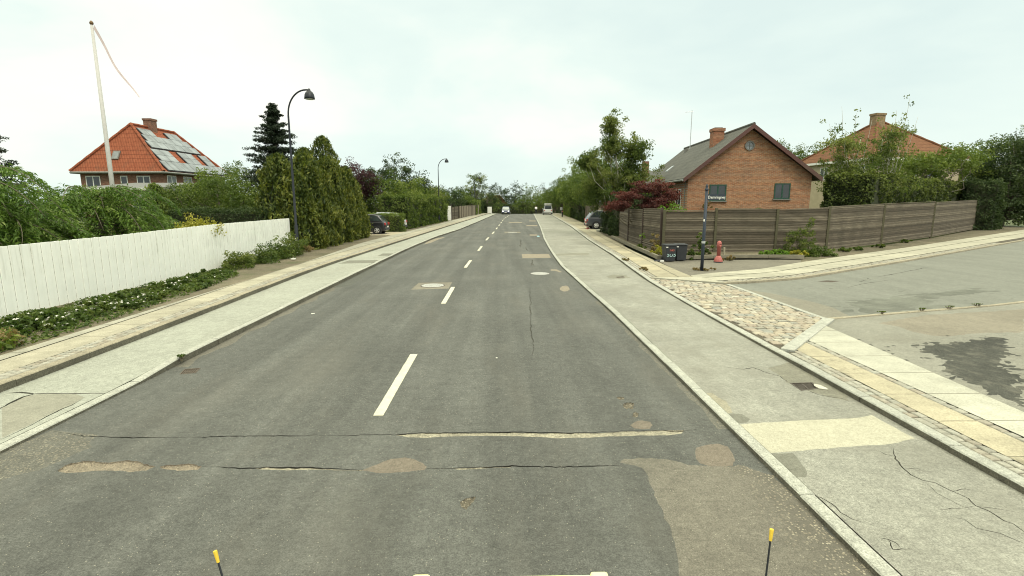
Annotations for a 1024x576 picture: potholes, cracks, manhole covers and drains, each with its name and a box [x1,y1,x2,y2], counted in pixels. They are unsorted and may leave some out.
pothole [460,497,476,510]
drain grate [790,382,818,391]
manhole cover [411,282,452,290]
crack [878,449,1024,542]
